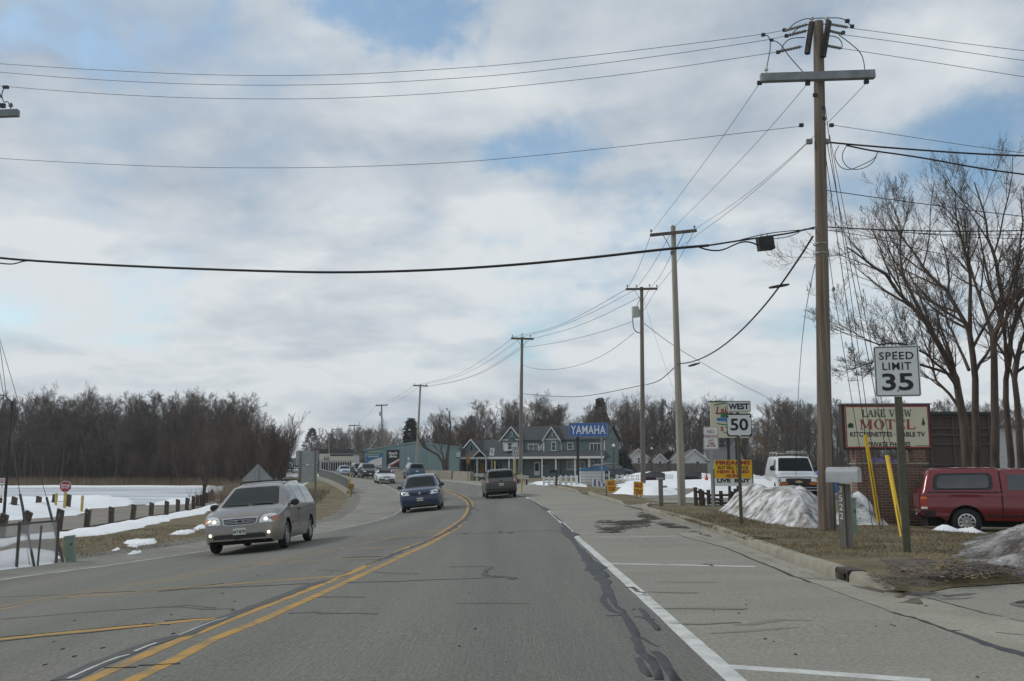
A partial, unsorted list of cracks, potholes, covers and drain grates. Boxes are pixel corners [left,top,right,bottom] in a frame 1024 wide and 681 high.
drain grate [835,566,865,582]
crack [334,491,551,583]
